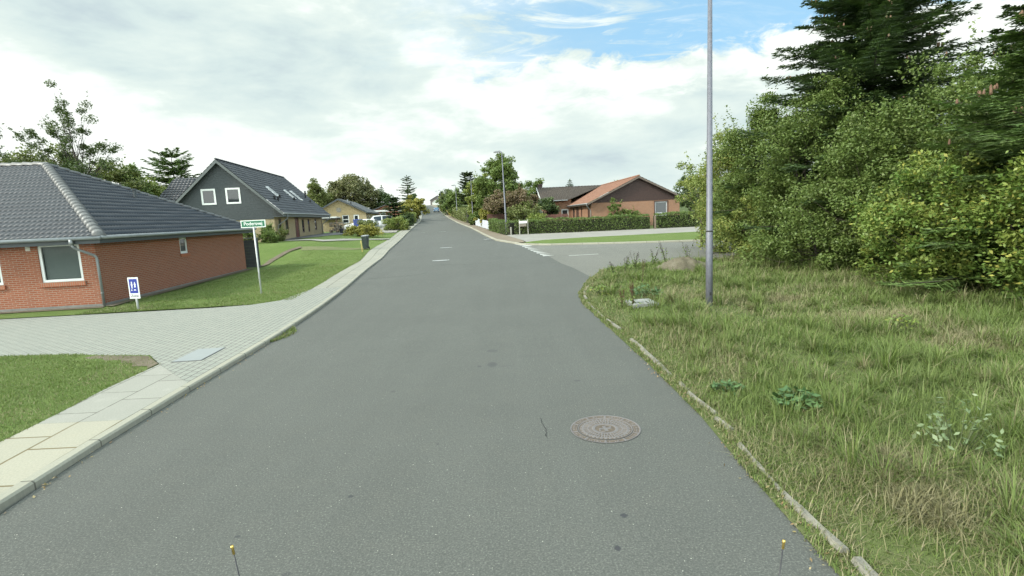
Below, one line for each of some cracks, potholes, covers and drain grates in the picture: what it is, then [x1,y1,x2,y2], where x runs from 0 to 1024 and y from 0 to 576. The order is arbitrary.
manhole cover [570,415,641,443]
utility cover [171,347,226,363]
